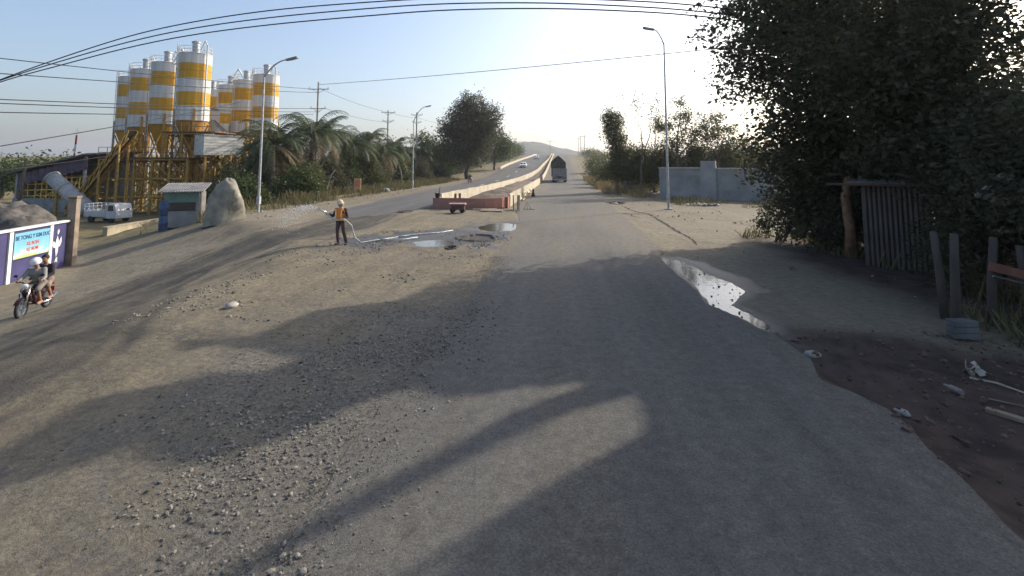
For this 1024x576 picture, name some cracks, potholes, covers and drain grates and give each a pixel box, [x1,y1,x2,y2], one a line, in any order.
crack [621,205,697,245]
